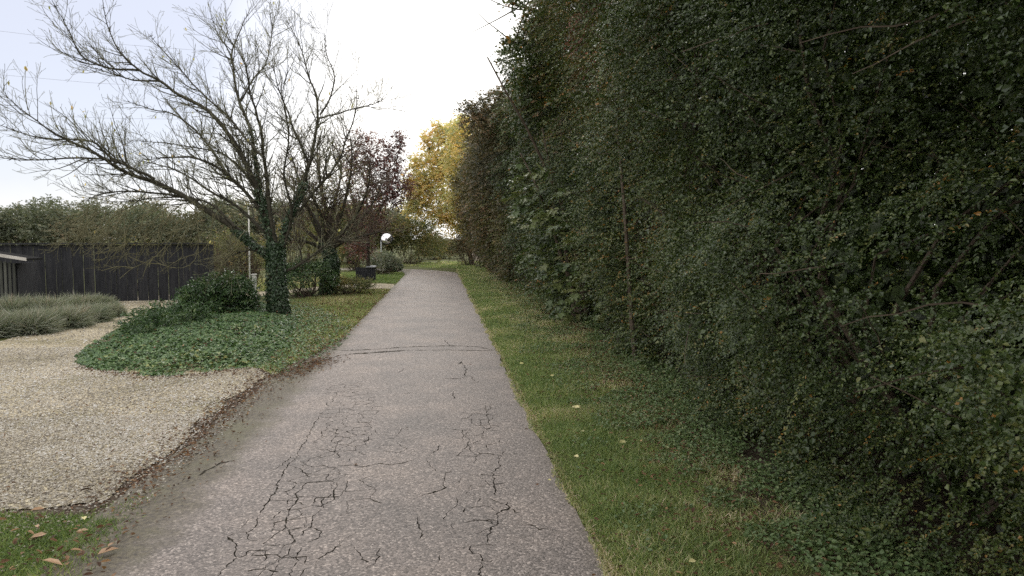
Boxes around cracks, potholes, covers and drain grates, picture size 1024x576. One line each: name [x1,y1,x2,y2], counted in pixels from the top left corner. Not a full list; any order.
crack [326,340,494,398]
crack [422,404,546,576]
crack [219,379,412,576]
